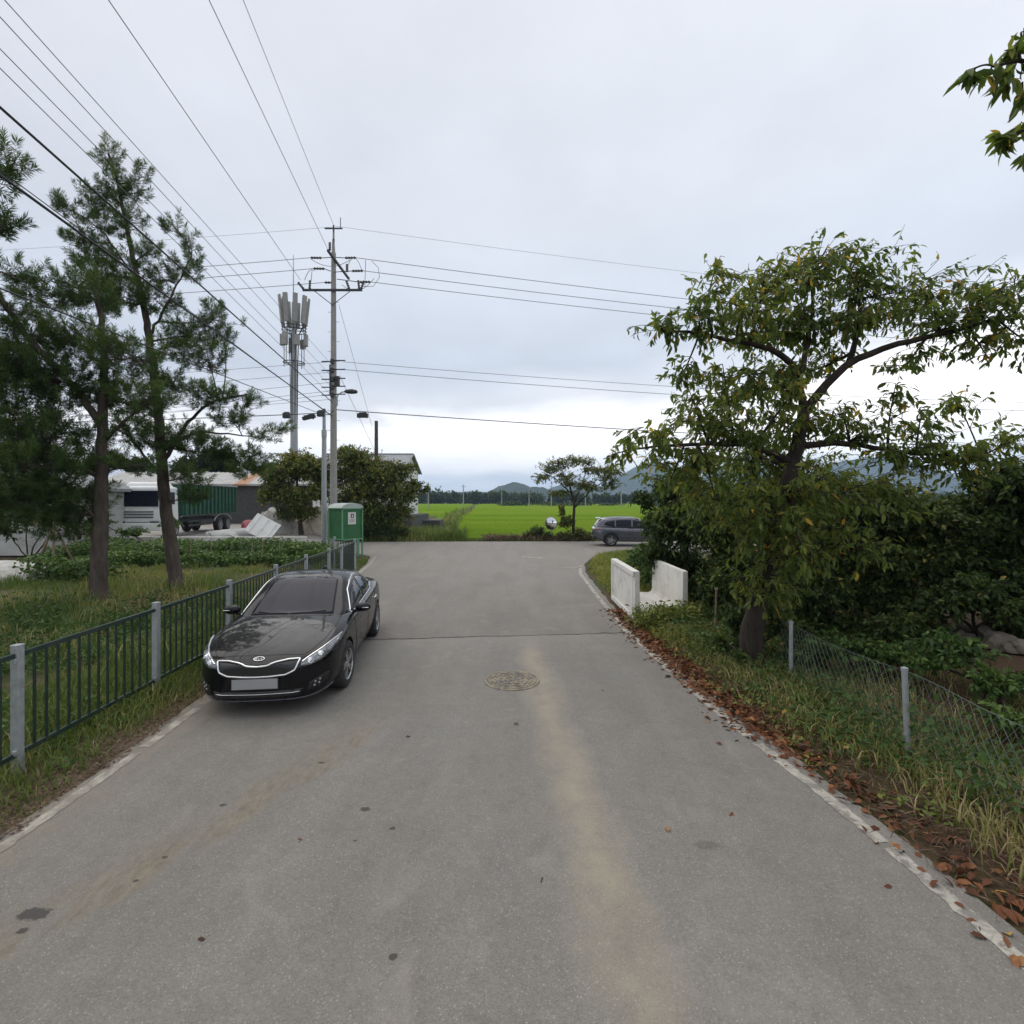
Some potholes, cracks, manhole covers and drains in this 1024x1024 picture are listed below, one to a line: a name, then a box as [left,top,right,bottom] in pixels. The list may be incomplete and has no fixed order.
manhole cover [484,671,540,691]
